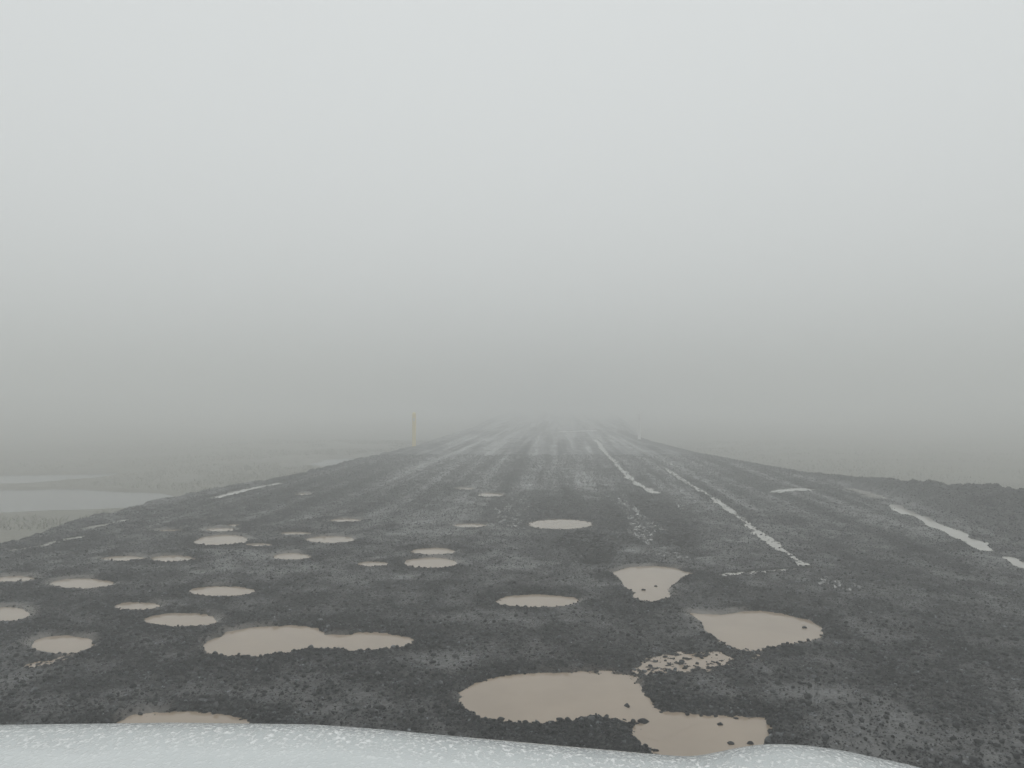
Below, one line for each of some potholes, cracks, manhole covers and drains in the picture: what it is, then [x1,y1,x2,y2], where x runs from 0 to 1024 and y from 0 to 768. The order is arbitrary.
pothole [398,543,469,555]
